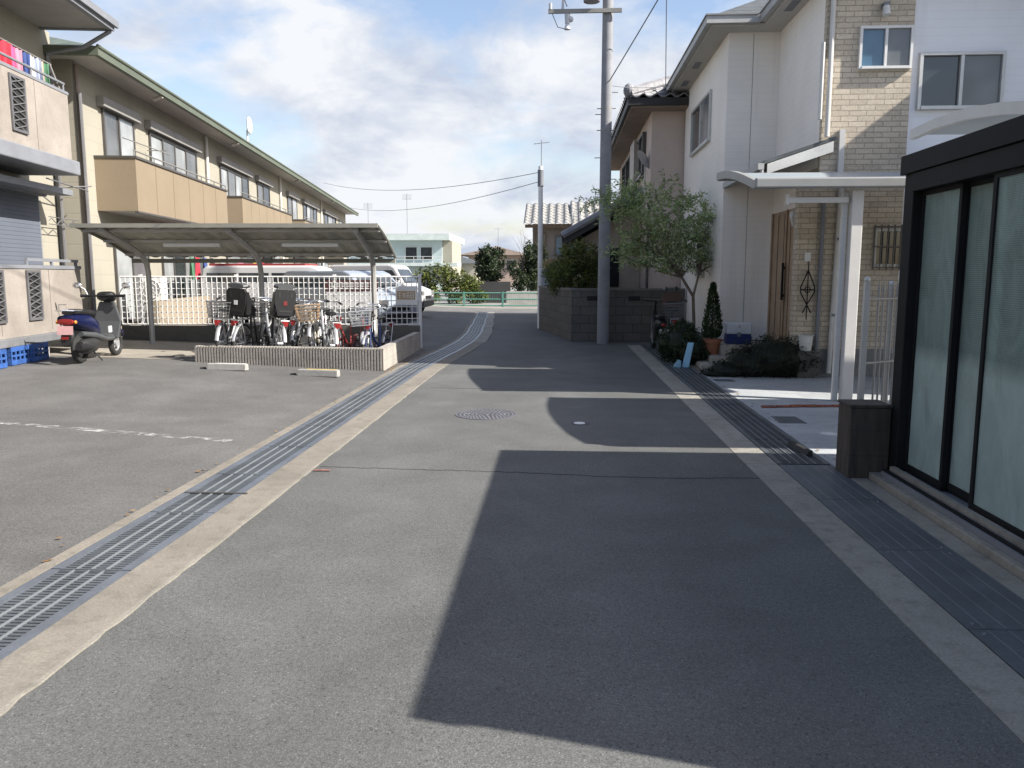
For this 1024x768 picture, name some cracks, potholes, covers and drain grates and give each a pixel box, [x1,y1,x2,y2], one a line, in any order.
drain grate [264,425,342,447]
drain grate [749,438,830,465]
drain grate [673,373,712,382]
drain grate [0,569,130,661]
drain grate [217,446,311,475]
drain grate [371,376,413,385]
drain grate [726,419,793,439]
drain grate [695,392,743,404]
drain grate [150,473,270,513]
drain grate [51,512,214,571]
drain grate [353,385,400,396]
manhole cover [455,409,517,420]
